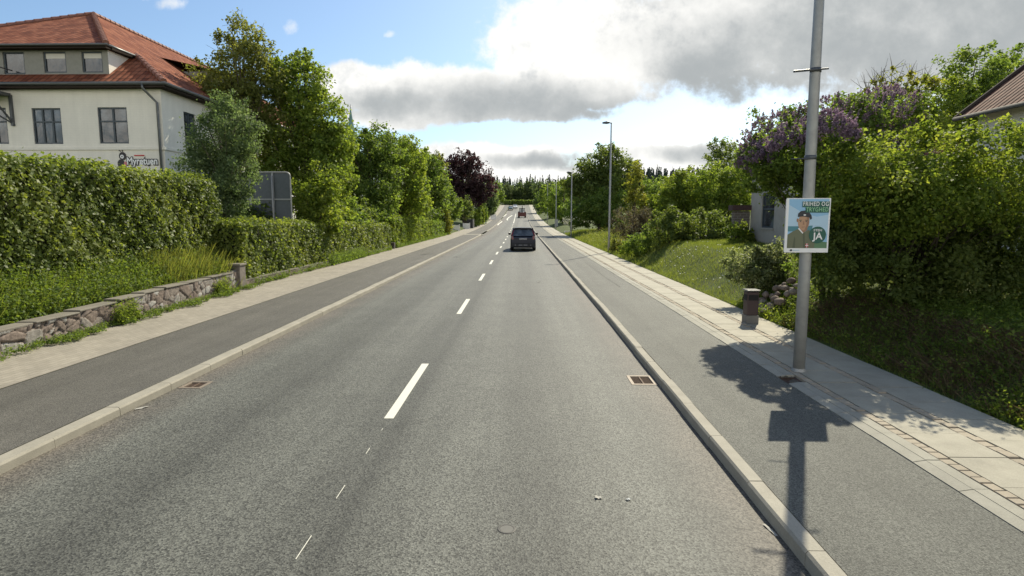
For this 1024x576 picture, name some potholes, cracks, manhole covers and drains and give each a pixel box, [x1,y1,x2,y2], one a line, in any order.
utility cover [497,524,516,534]
drain grate [179,381,213,389]
drain grate [626,375,658,385]
